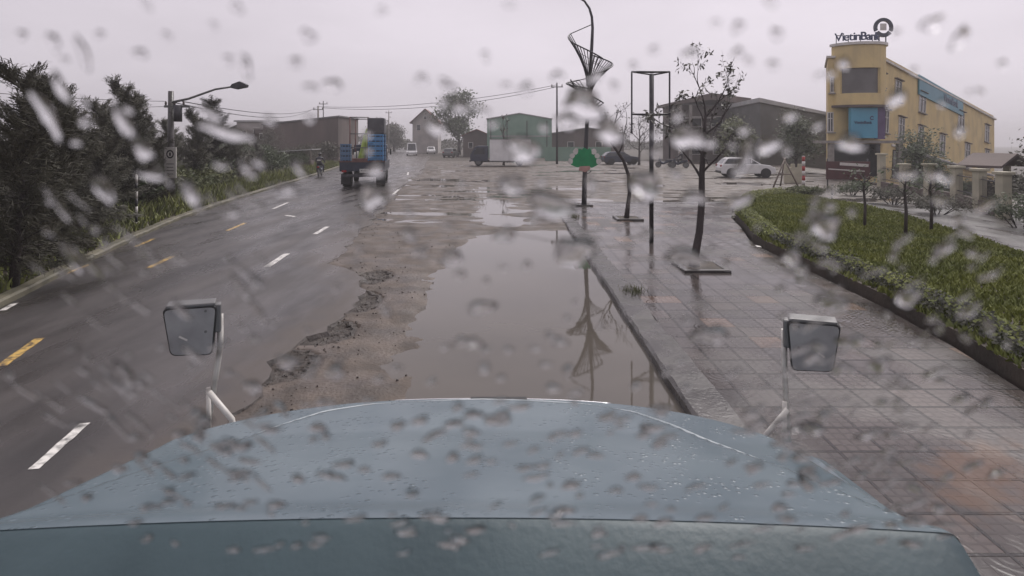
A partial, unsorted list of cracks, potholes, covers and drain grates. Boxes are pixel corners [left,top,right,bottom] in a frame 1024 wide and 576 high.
pothole [359,270,394,287]
pothole [299,321,359,347]
pothole [264,349,322,387]
pothole [347,290,383,314]
